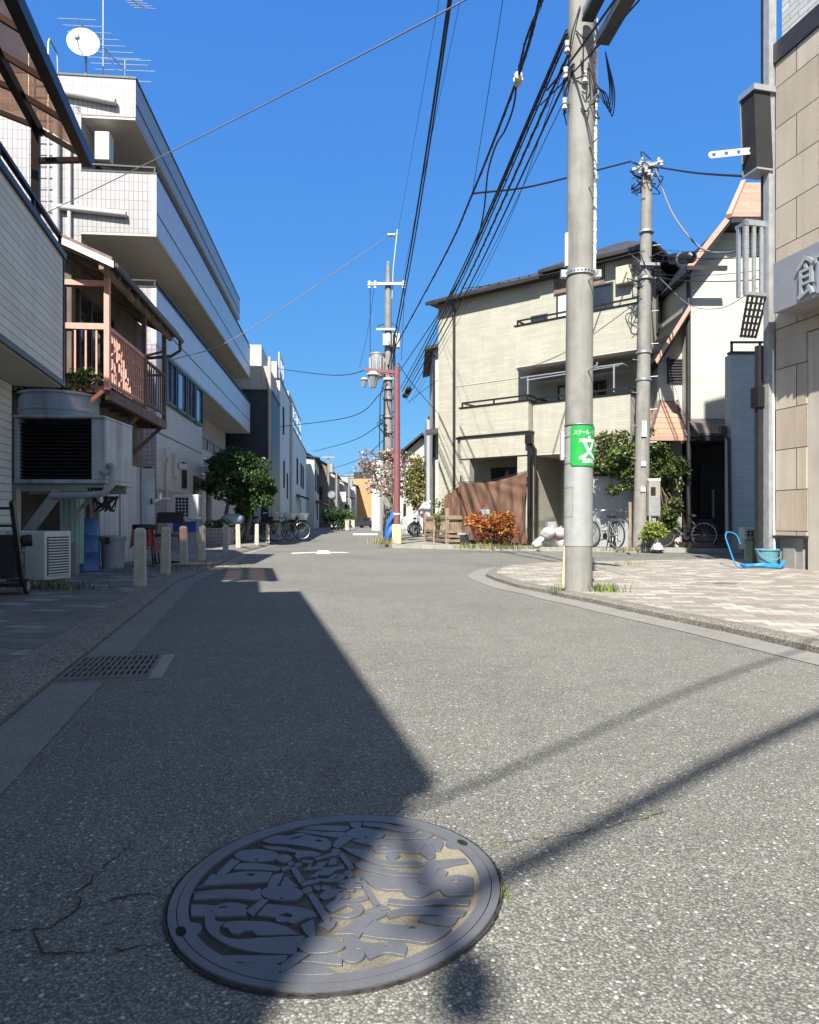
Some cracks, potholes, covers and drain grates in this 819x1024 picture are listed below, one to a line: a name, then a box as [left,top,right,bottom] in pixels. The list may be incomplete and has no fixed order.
manhole cover [162,814,504,1000]
drain grate [51,653,175,684]
crack [0,842,172,957]
